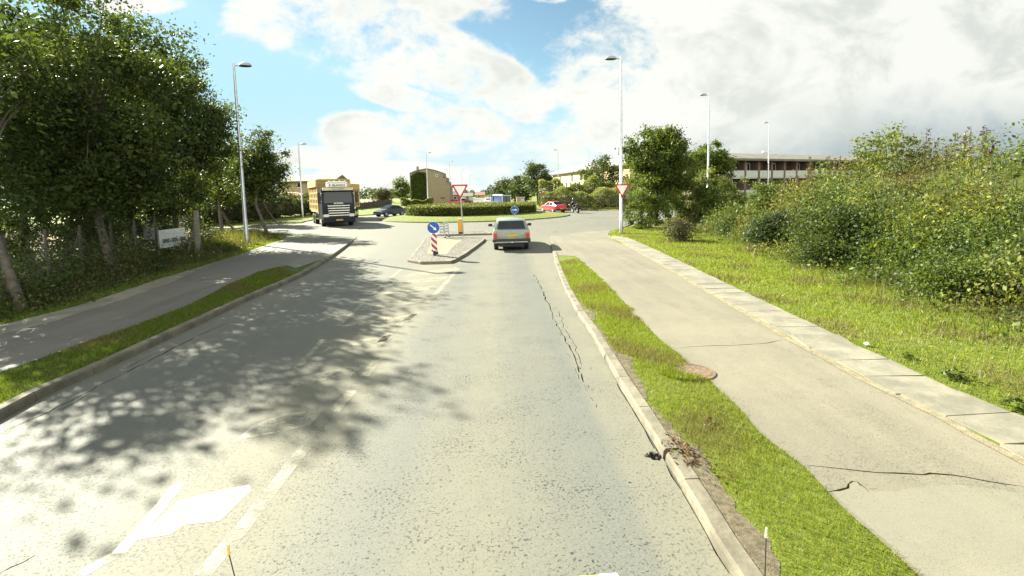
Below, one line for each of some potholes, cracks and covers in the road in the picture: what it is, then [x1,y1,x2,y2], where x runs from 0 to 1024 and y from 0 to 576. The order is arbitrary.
crack [536,277,597,407]
crack [810,465,1018,494]
manhole cover [670,363,716,381]
